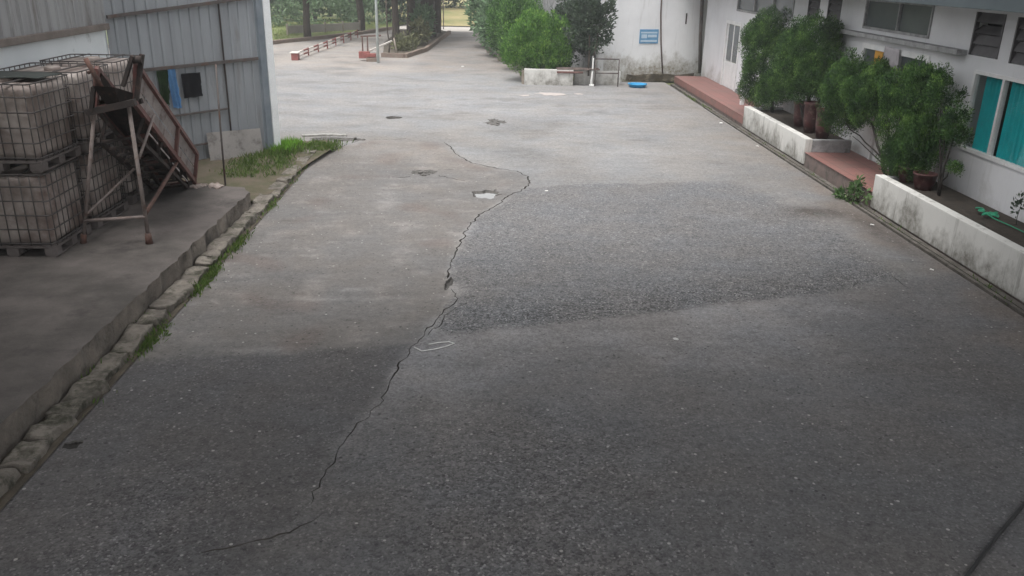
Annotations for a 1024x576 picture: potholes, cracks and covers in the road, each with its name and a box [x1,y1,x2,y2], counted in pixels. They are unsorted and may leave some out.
crack [197,143,531,554]
pothole [472,189,502,199]
